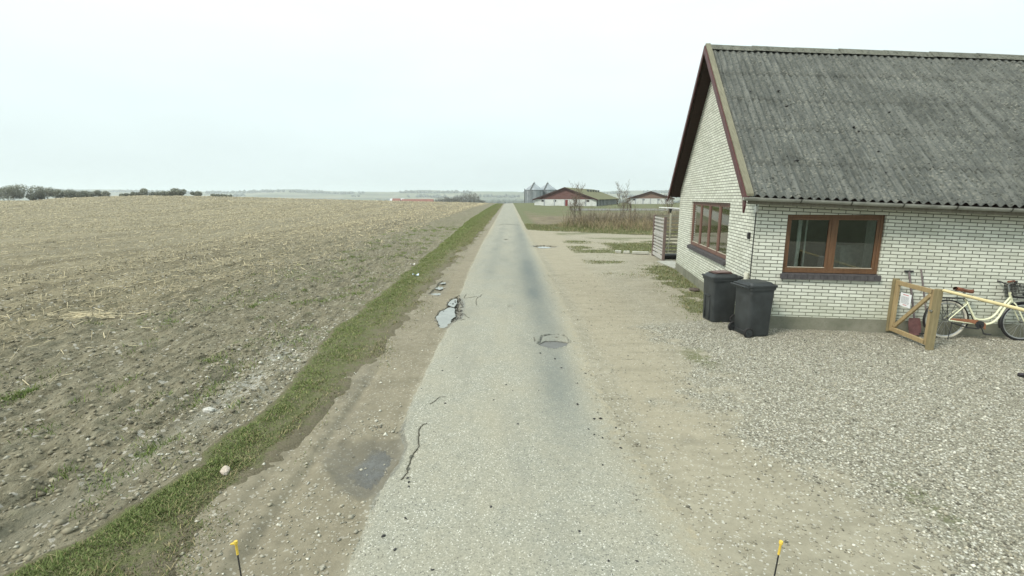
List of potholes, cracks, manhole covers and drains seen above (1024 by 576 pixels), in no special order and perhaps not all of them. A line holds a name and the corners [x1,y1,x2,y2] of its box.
pothole [434,295,464,329]
crack [401,423,428,480]
pothole [428,280,448,296]
